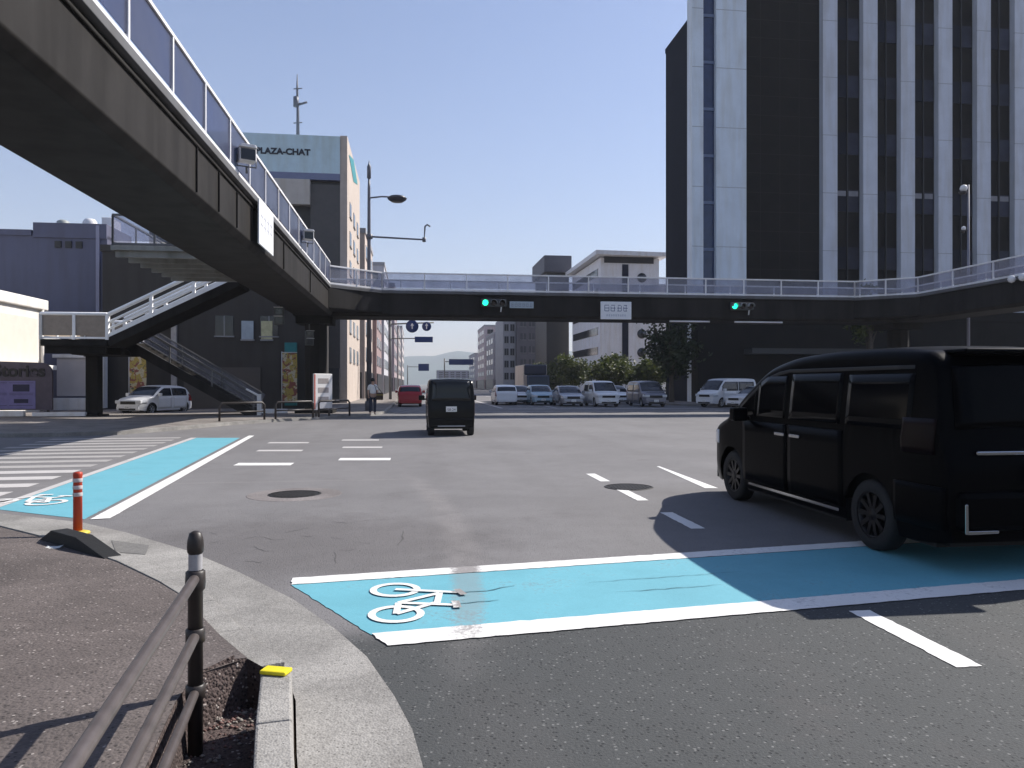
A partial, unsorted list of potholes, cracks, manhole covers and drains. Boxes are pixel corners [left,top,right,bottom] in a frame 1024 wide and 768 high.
crack [210,520,369,563]
manhole cover [246,488,342,502]
